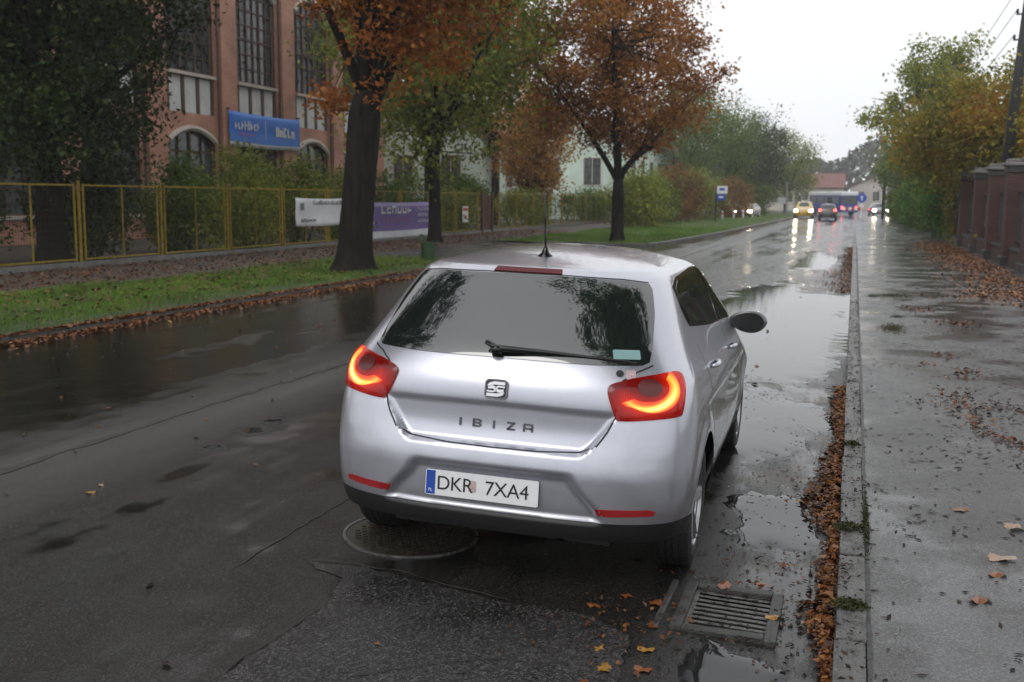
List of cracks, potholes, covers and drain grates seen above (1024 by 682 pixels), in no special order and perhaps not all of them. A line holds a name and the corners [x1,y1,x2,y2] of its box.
manhole cover [343,517,479,558]
drain grate [652,579,784,647]
crack [229,498,348,571]
